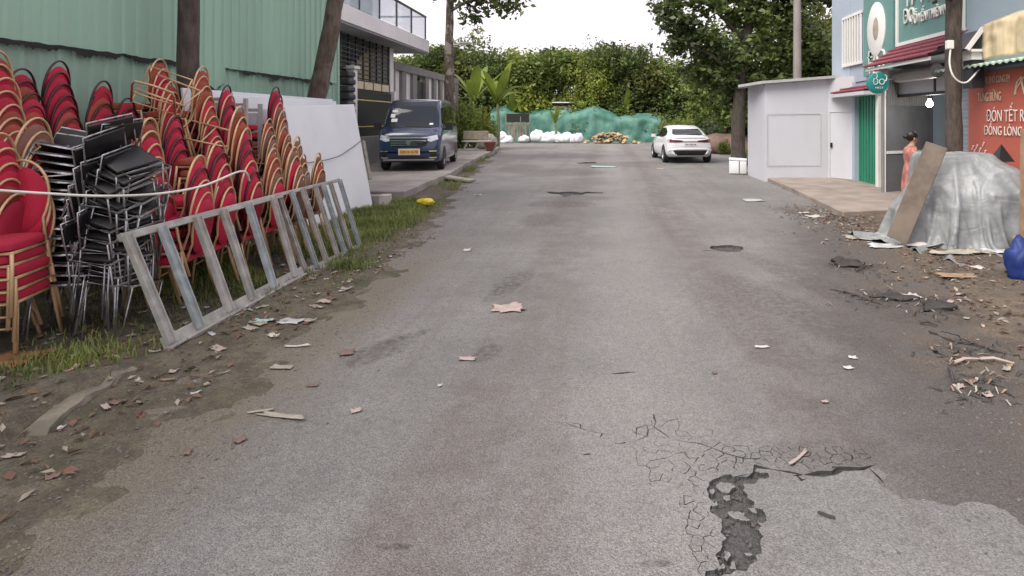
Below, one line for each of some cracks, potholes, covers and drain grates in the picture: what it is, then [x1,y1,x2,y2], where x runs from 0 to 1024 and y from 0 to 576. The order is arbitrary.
crack [558,414,884,574]
pothole [705,471,769,576]
